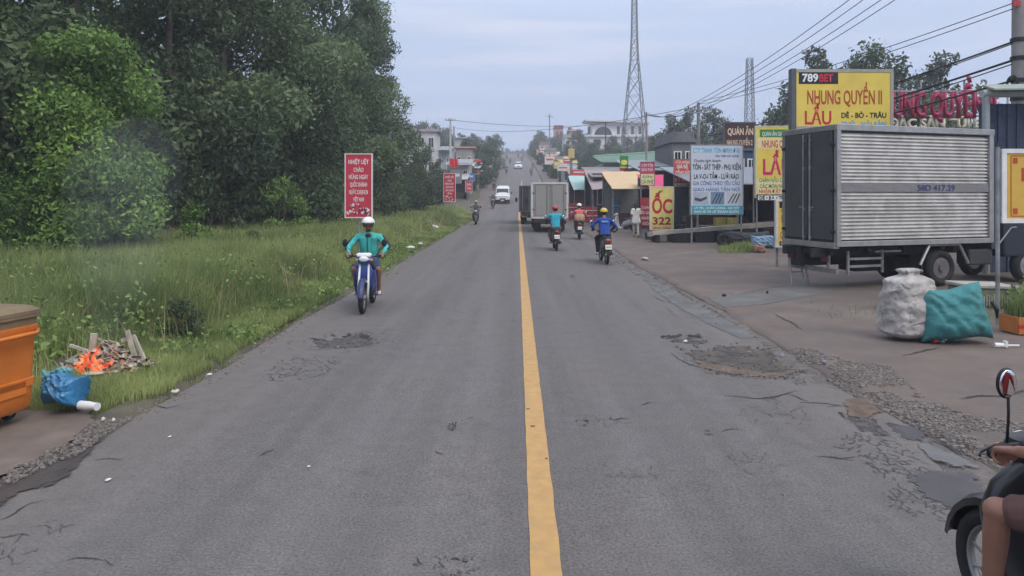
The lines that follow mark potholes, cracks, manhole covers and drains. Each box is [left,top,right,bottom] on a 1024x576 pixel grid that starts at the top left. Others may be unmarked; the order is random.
crack [265,329,393,381]
pothole [660,333,708,344]
crack [417,555,483,576]
crack [816,423,971,521]
pothole [312,333,380,349]
pothole [675,342,808,379]
crack [671,346,841,425]
crack [0,500,71,564]
